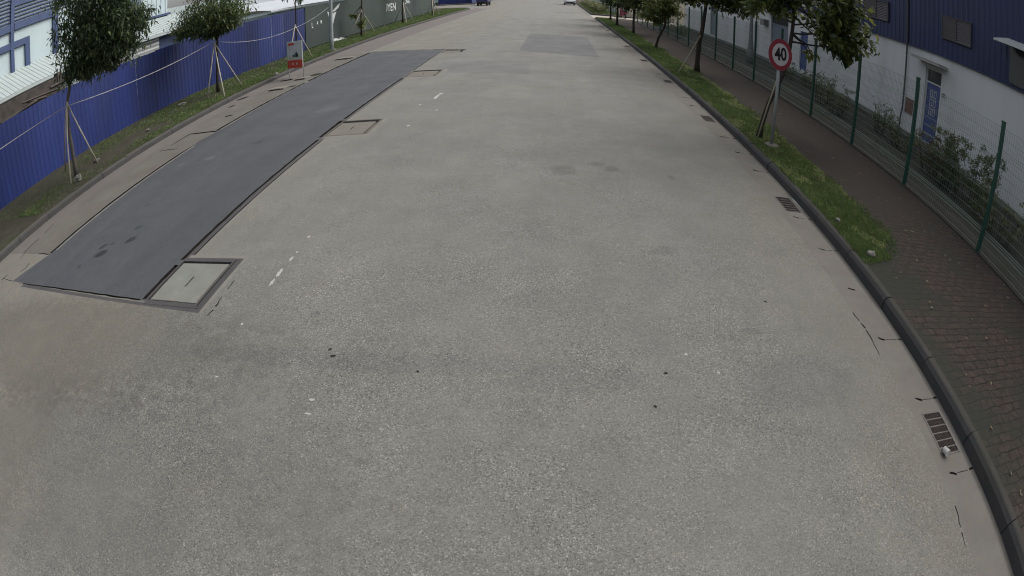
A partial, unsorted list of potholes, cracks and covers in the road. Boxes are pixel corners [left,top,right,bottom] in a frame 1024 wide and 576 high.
drain grate [774,196,802,213]
drain grate [921,411,960,456]
manhole cover [143,258,240,309]
manhole cover [403,69,444,78]
manhole cover [323,118,384,137]
